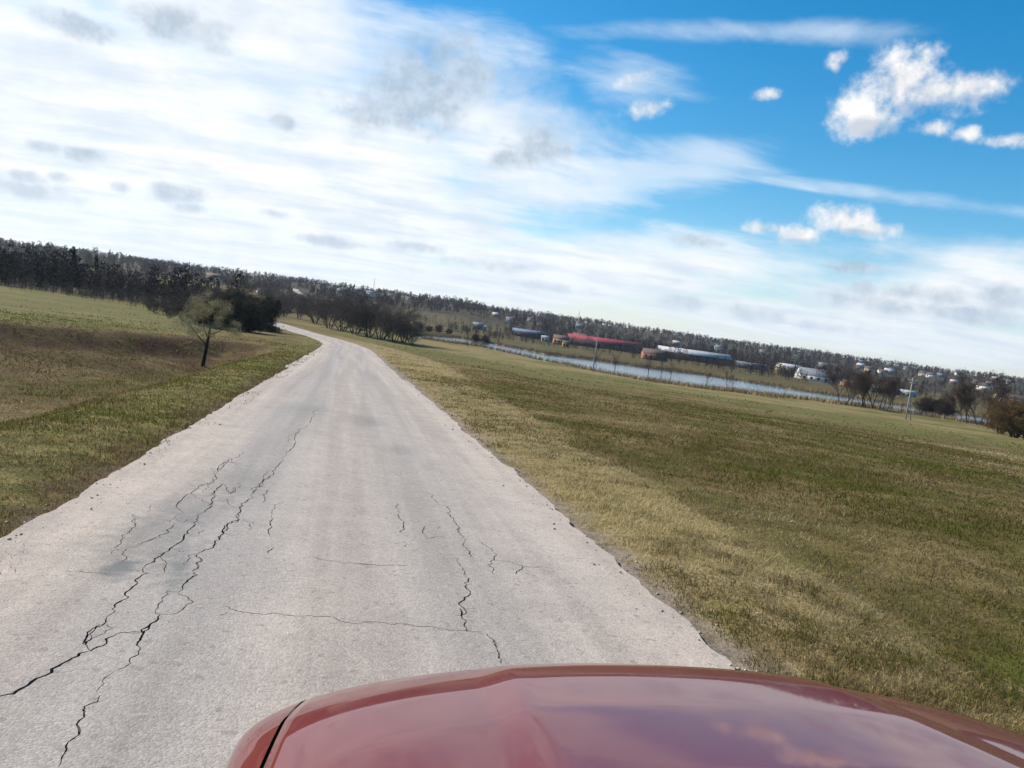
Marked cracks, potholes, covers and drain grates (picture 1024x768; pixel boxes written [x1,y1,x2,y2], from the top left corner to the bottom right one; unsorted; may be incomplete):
crack [0,409,319,767]
crack [221,491,524,663]
